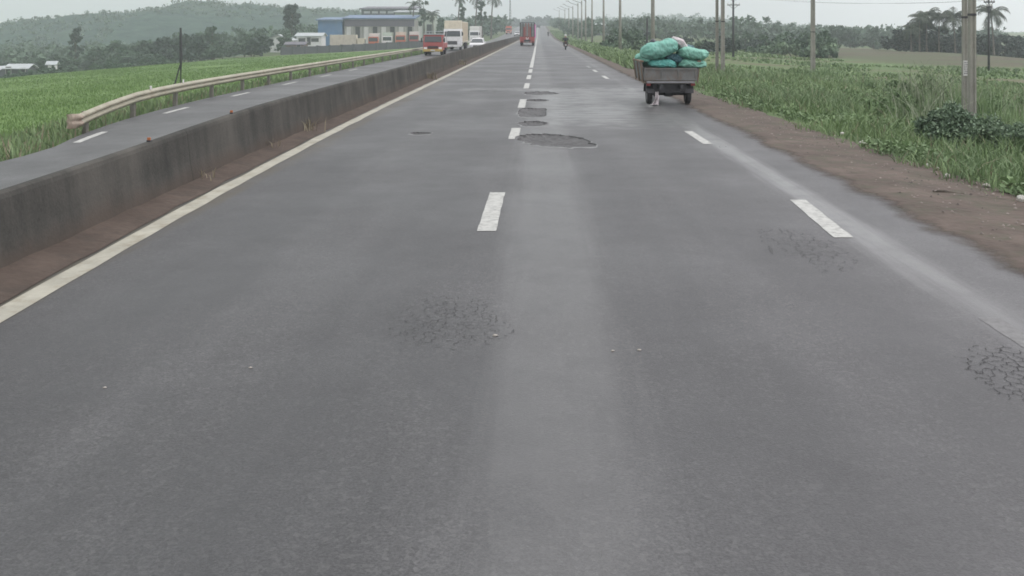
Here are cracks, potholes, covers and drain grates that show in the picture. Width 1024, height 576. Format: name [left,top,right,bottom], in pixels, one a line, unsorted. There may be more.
pothole [516,133,598,149]
crack [759,227,858,272]
pothole [516,108,548,118]
crack [953,345,1024,401]
crack [388,296,514,350]
